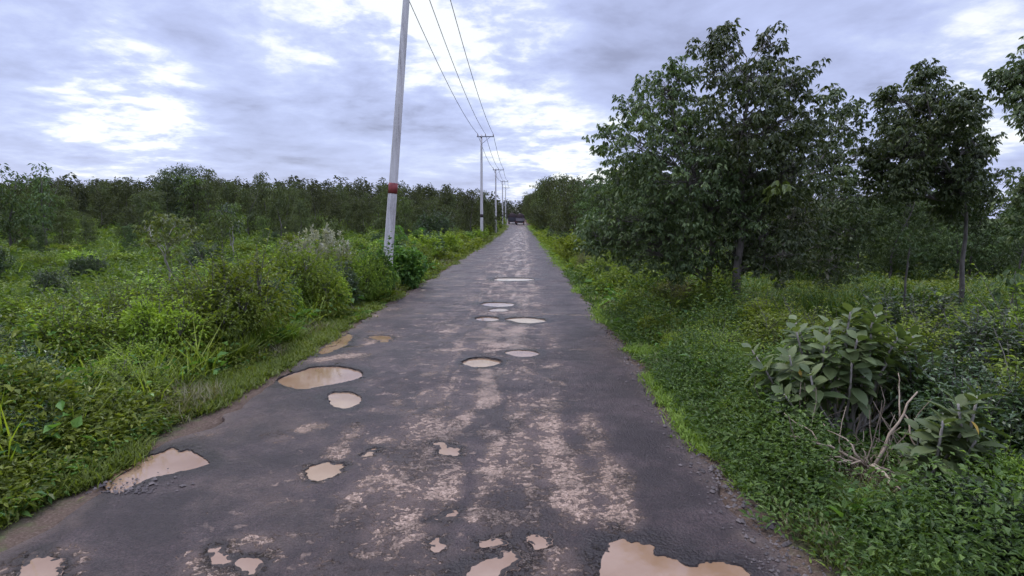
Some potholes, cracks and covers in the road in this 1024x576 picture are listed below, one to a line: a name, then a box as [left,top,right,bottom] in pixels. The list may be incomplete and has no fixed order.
pothole [16,548,66,576]
pothole [327,391,362,408]
pothole [304,460,346,481]
pothole [526,535,553,550]
pothole [276,365,364,389]
pothole [461,357,503,367]
pothole [204,546,266,576]
pothole [318,334,354,354]
pothole [433,442,461,456]
pothole [462,550,523,576]
pothole [104,447,210,493]
pothole [599,537,752,576]
